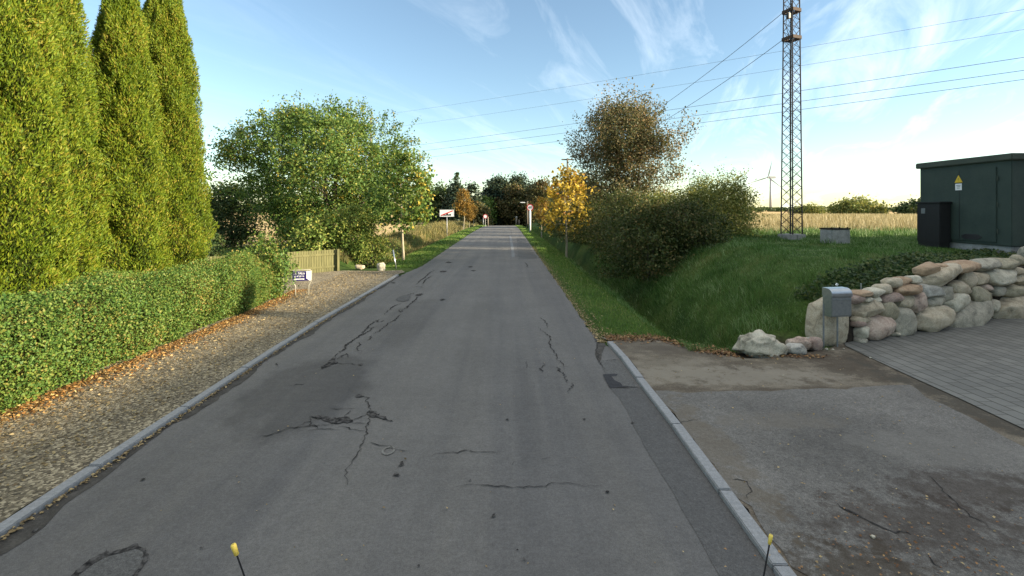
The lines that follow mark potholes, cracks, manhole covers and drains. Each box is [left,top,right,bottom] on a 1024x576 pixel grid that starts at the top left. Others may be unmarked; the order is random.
crack [526,318,574,392]
crack [837,503,908,533]
crack [335,271,432,364]
crack [261,384,403,485]
